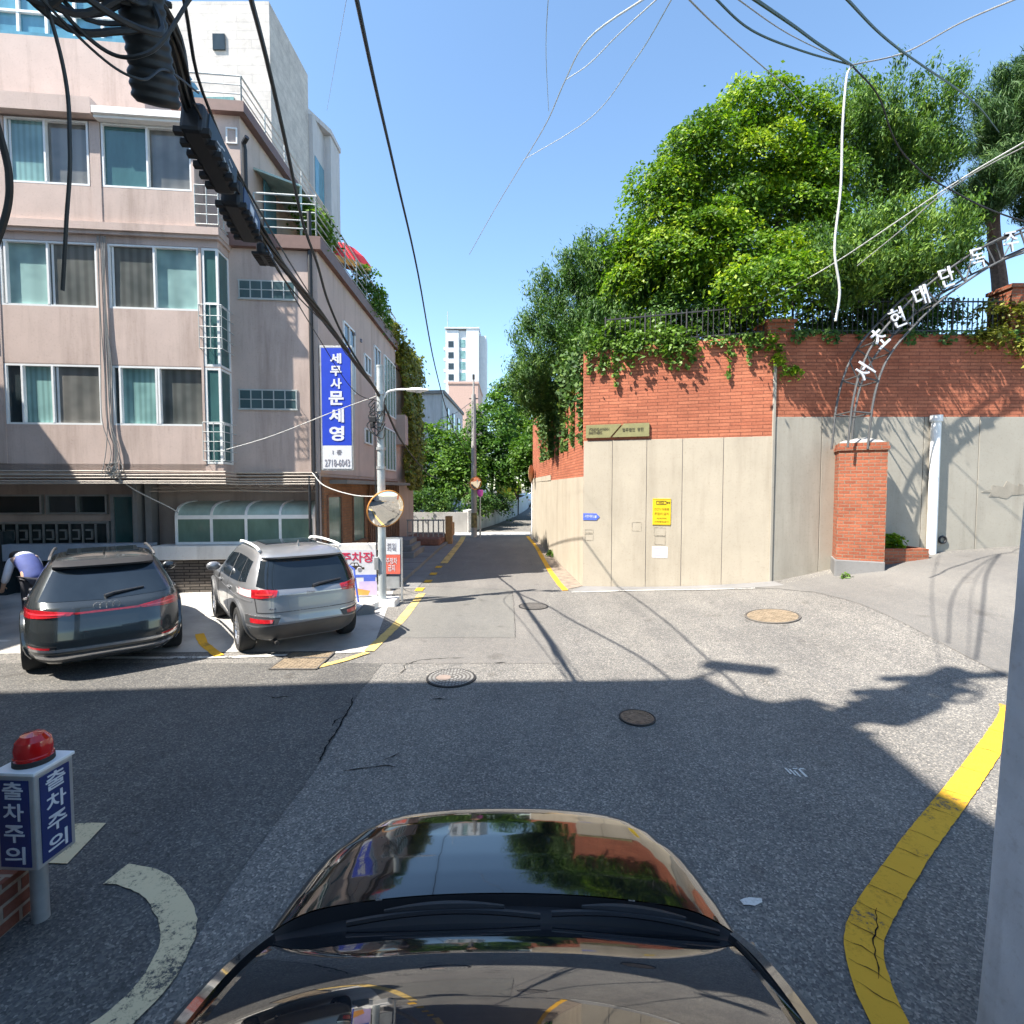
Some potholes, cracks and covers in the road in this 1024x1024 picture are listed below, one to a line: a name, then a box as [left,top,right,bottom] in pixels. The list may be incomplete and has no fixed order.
crack [318,698,398,771]
manhole cover [744,608,801,624]
manhole cover [426,669,476,688]
manhole cover [619,709,656,727]
